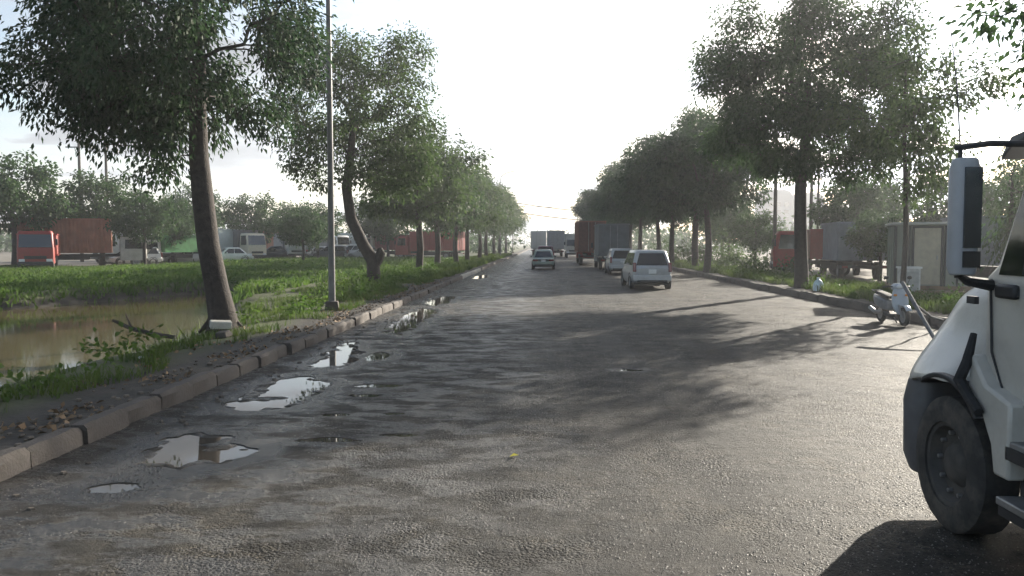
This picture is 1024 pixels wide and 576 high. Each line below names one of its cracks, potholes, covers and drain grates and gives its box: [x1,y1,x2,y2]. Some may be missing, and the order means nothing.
pothole [425,296,458,306]
pothole [307,341,366,369]
pothole [382,308,438,335]
pothole [220,375,332,411]
pothole [87,482,141,493]
pothole [134,432,259,470]
pothole [365,352,391,361]
